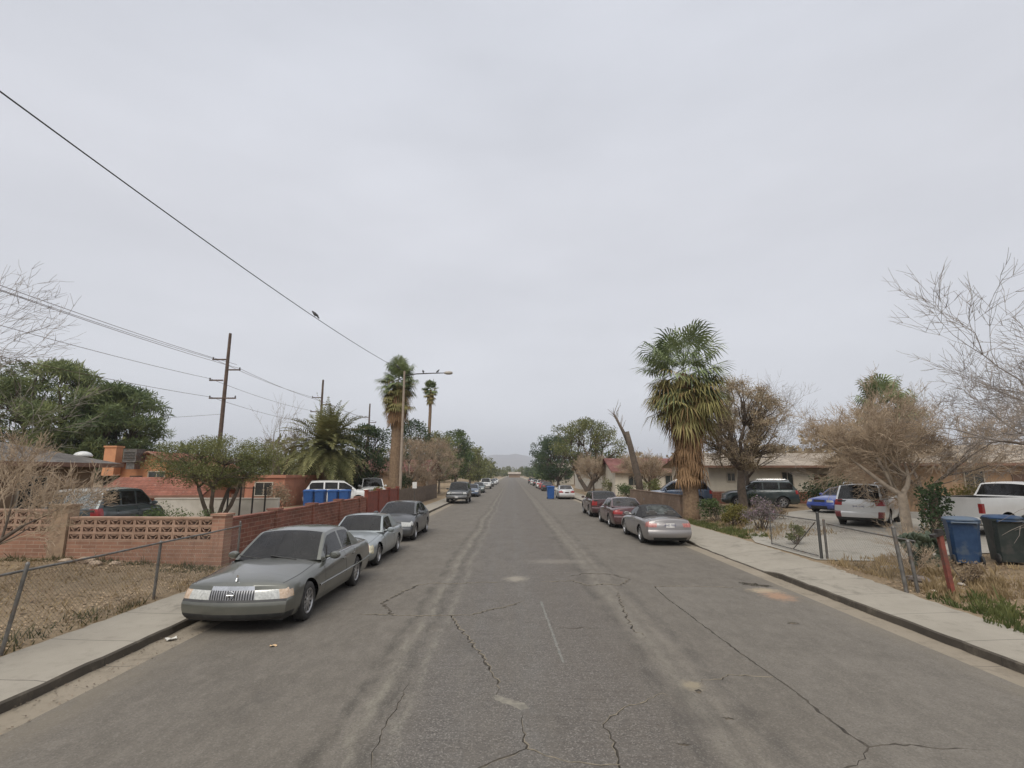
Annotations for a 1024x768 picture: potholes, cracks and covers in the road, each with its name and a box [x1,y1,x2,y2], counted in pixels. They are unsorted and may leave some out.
crack [363,582,671,768]
